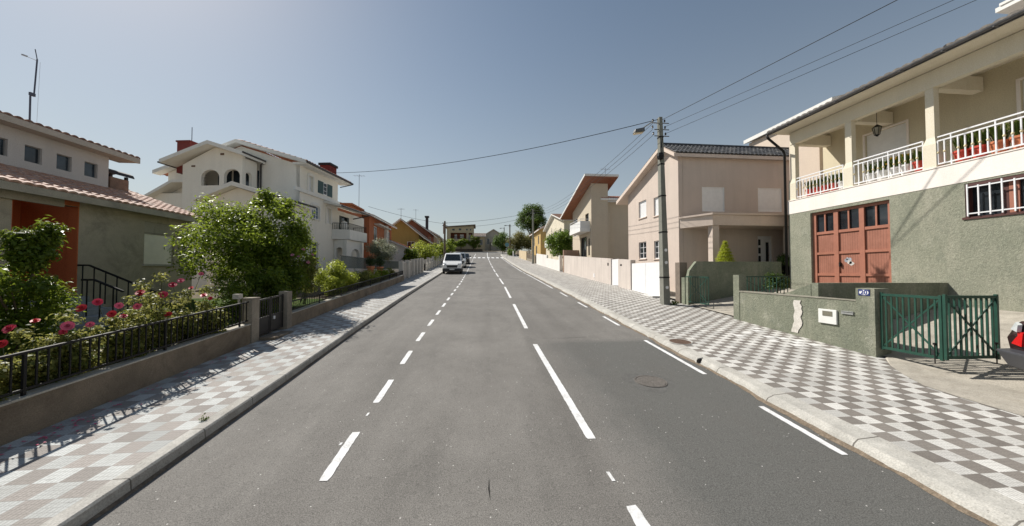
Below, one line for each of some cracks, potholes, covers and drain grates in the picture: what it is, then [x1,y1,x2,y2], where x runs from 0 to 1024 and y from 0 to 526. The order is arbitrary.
manhole cover [634,375,668,388]
